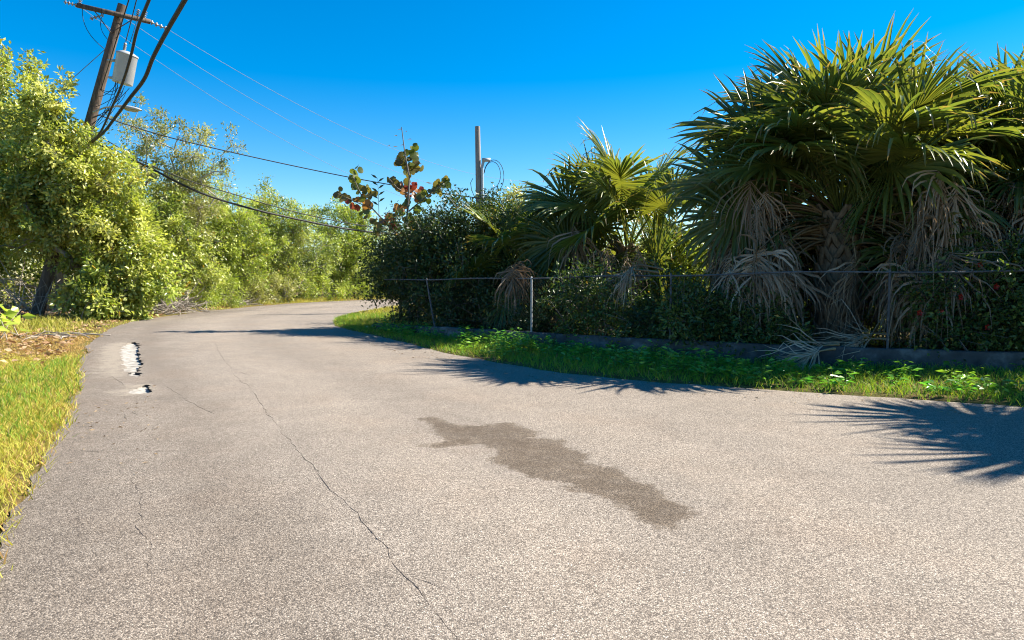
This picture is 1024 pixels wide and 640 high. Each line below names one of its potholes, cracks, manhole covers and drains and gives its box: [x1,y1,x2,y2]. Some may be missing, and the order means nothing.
crack [116,472,152,568]
pothole [118,342,143,377]
pothole [129,385,152,394]
crack [217,347,457,640]
